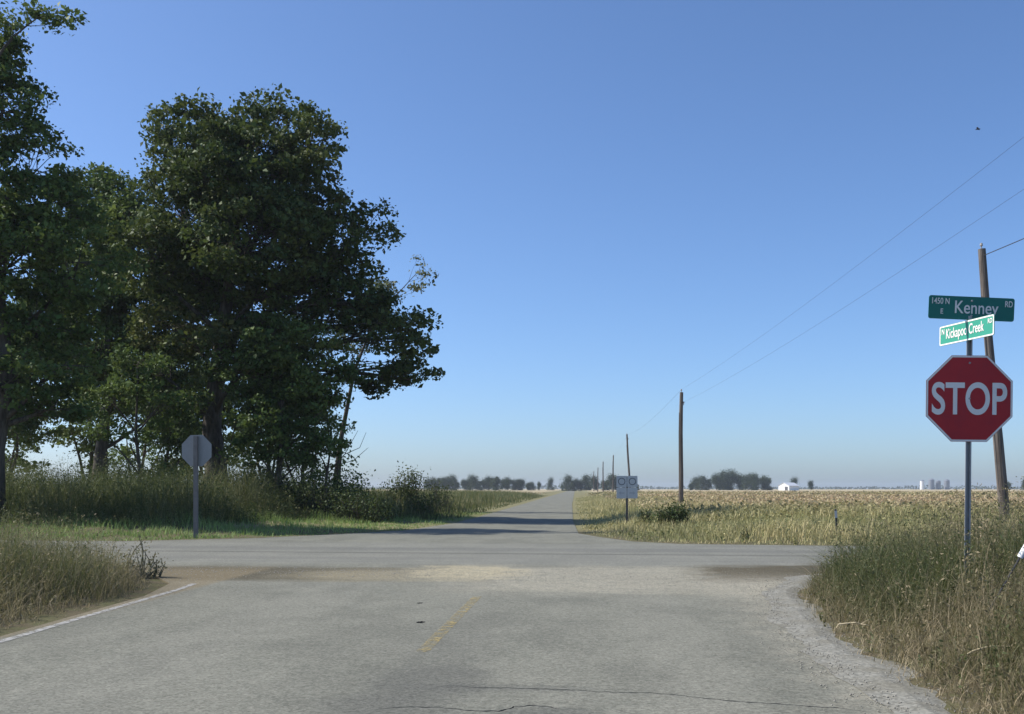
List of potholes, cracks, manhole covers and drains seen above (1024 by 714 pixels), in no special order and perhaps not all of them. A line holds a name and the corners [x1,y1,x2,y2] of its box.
crack [371,685,865,712]
